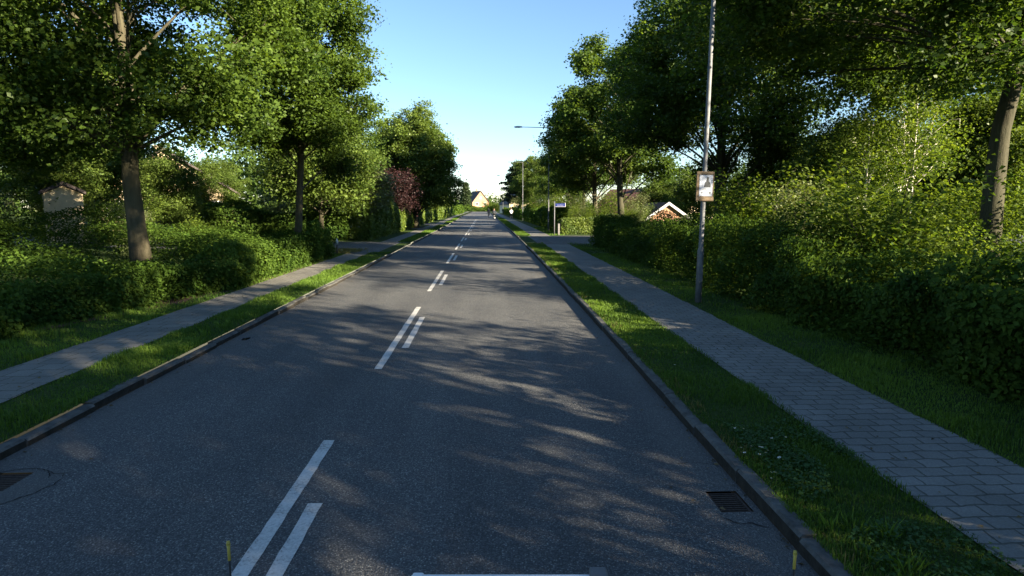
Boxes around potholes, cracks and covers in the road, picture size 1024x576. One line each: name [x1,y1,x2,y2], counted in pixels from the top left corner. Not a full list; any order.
drain grate [0,474,30,491]
drain grate [707,493,752,513]
